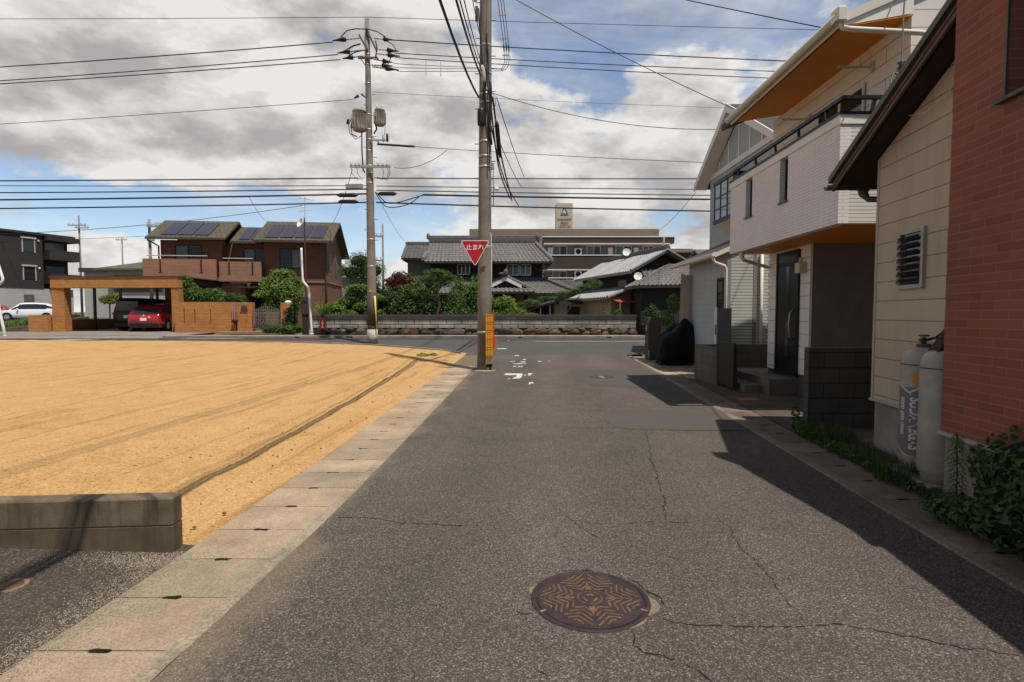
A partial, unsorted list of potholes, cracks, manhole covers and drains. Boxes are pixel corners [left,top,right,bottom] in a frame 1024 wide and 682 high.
crack [632,633,712,682]
manhole cover [0,578,30,593]
manhole cover [529,571,660,633]
crack [565,428,1018,656]
crack [340,517,478,526]
